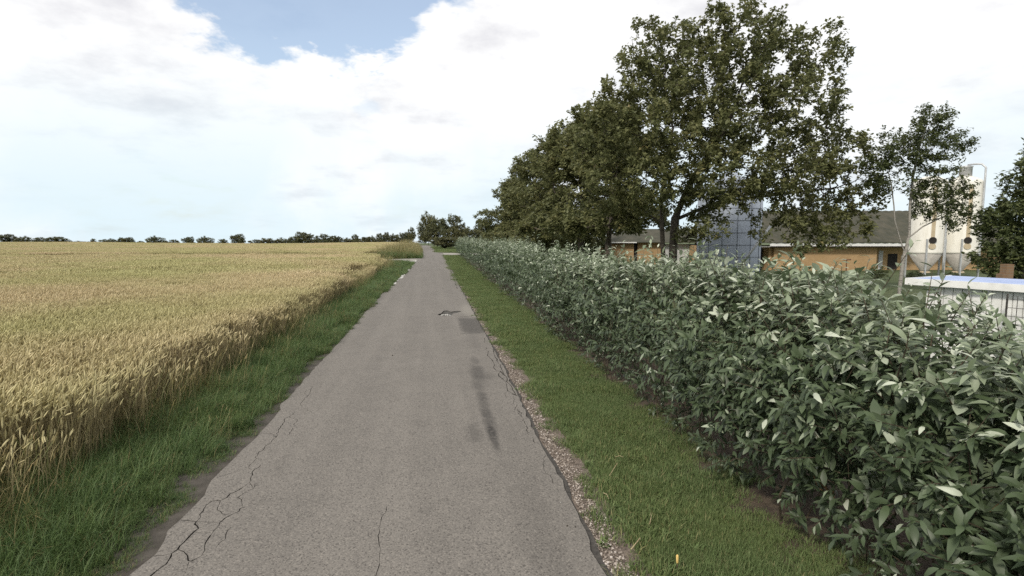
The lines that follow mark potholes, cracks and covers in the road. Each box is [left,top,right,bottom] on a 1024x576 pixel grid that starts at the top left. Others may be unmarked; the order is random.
crack [150,413,298,576]
